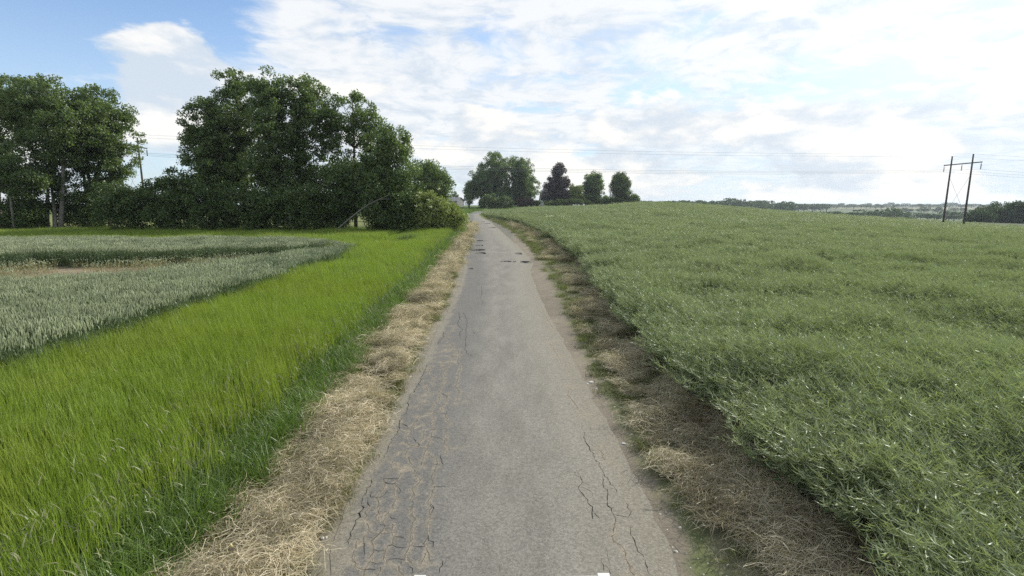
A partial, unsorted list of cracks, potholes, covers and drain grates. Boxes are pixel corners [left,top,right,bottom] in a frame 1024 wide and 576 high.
crack [561,379,650,576]
crack [347,313,474,576]
